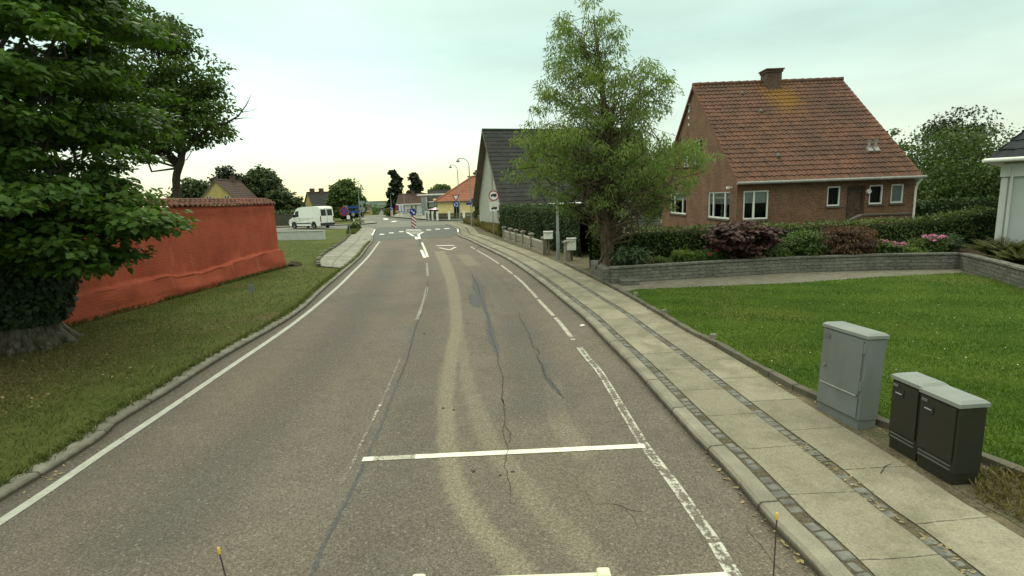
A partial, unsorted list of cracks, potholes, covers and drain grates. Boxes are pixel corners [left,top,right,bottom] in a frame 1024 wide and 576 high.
crack [466,274,511,496]
crack [519,315,564,398]
